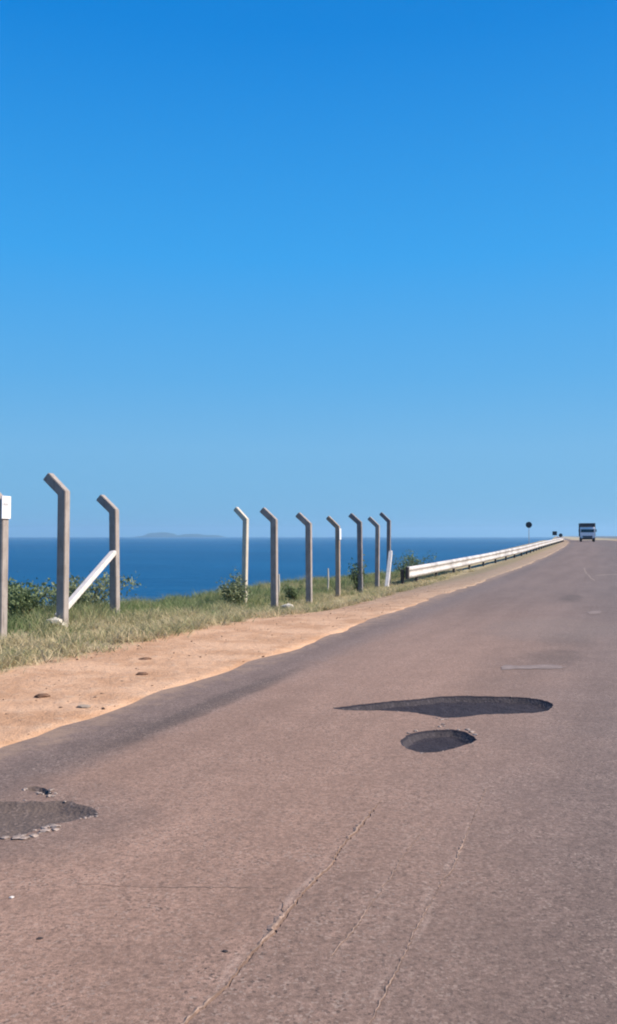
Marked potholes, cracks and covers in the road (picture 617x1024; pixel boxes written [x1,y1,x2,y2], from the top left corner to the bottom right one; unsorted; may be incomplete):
pothole [333,695,555,720]
pothole [22,786,58,797]
crack [81,788,486,1024]
pothole [0,799,99,840]
pothole [400,723,478,754]
